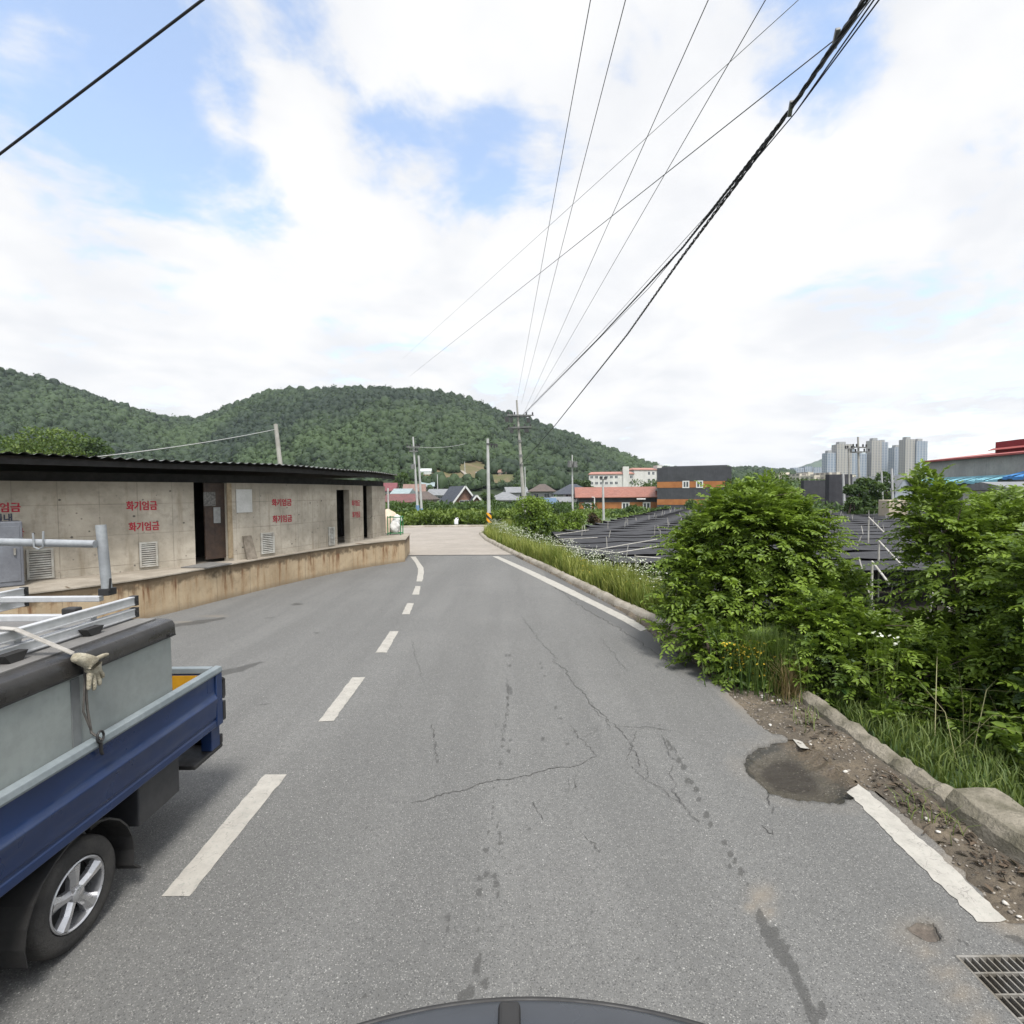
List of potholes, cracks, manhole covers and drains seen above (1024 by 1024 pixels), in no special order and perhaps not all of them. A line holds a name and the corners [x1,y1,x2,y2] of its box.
pothole [906,923,940,942]
crack [397,618,700,822]
pothole [744,740,856,805]
drain grate [956,954,1024,1024]
